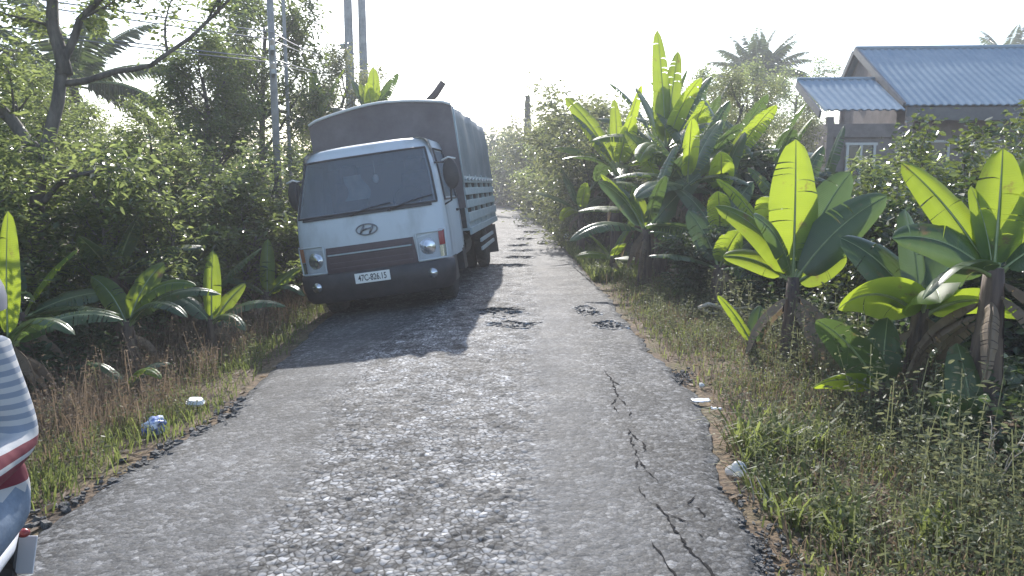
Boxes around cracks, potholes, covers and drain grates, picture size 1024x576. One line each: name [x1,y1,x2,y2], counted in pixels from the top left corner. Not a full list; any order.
crack [605,371,715,576]
pothole [591,319,631,330]
pothole [571,304,603,316]
pothole [466,306,530,320]
pothole [485,319,543,329]
